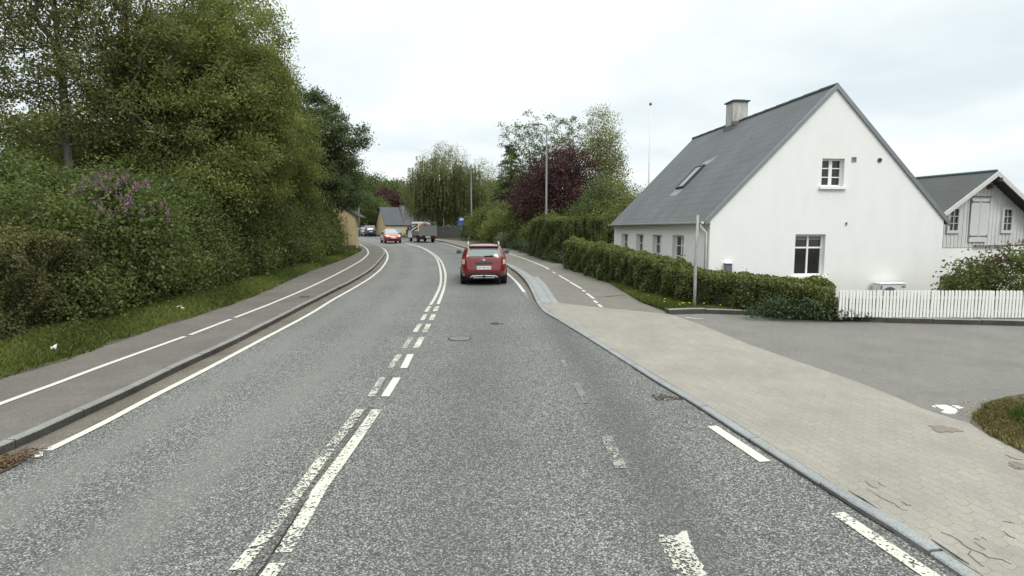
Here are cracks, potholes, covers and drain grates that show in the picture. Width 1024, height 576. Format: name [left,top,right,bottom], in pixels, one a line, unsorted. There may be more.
pothole [651,393,682,401]
crack [942,532,1011,566]
